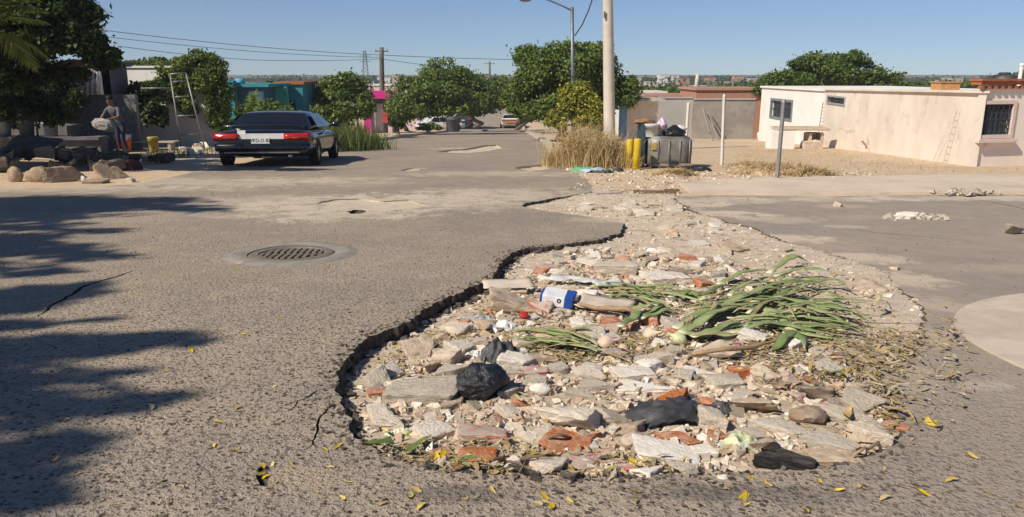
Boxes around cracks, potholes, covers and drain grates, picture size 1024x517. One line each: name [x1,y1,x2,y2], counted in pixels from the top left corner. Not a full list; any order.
crack [291,387,331,450]
crack [38,270,135,317]
pothole [334,191,928,478]
